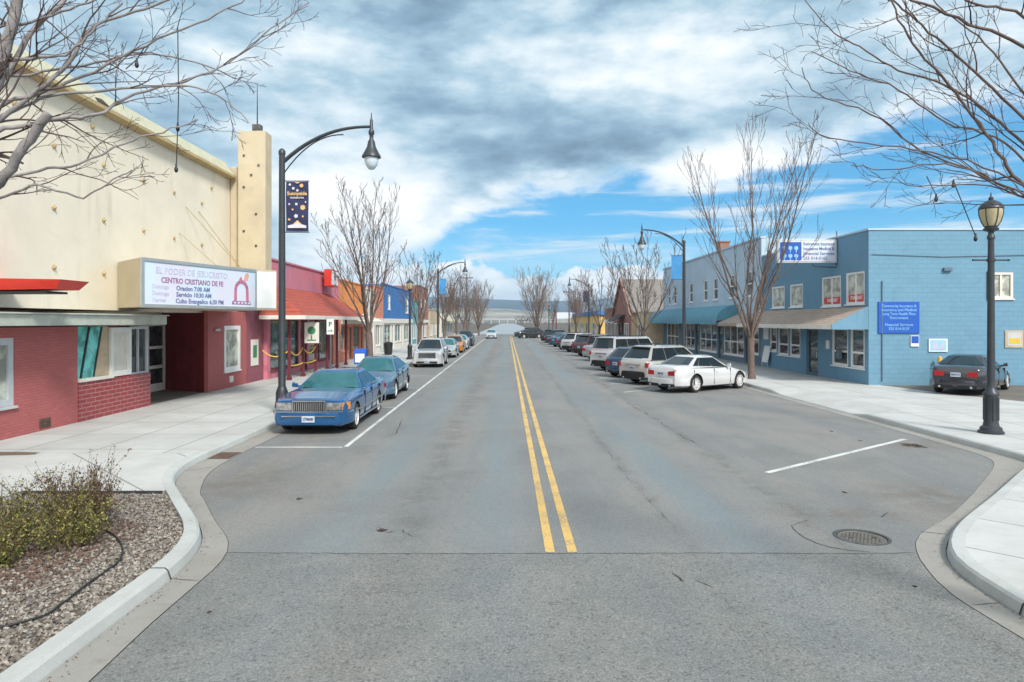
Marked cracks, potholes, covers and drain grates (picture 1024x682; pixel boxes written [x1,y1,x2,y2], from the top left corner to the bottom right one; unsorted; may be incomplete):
crack [791,520,870,552]
manhole cover [832,529,892,546]
